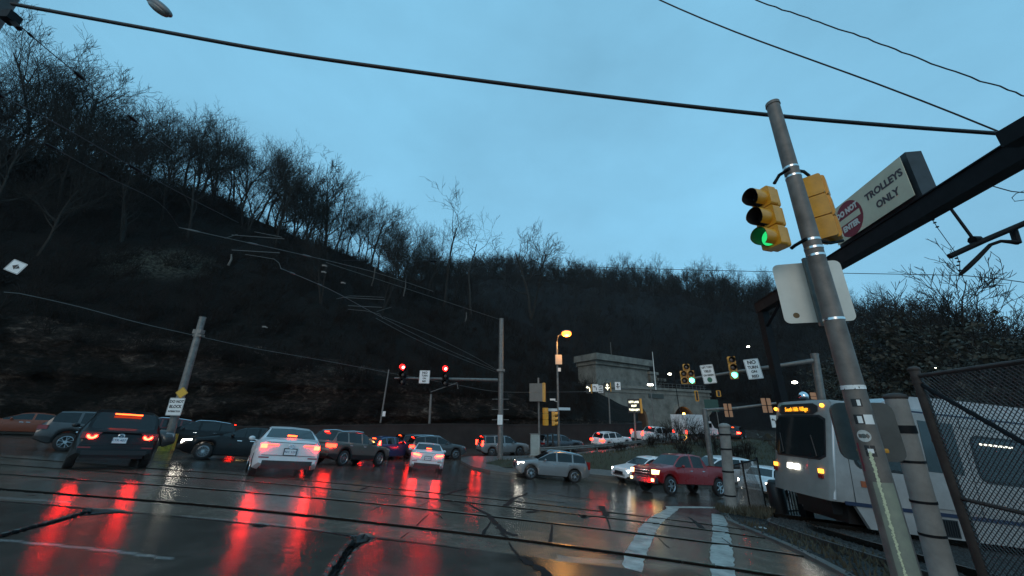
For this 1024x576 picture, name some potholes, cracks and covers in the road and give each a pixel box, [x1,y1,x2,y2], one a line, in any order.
crack [0,495,92,538]
crack [433,487,664,576]
crack [327,543,355,576]
